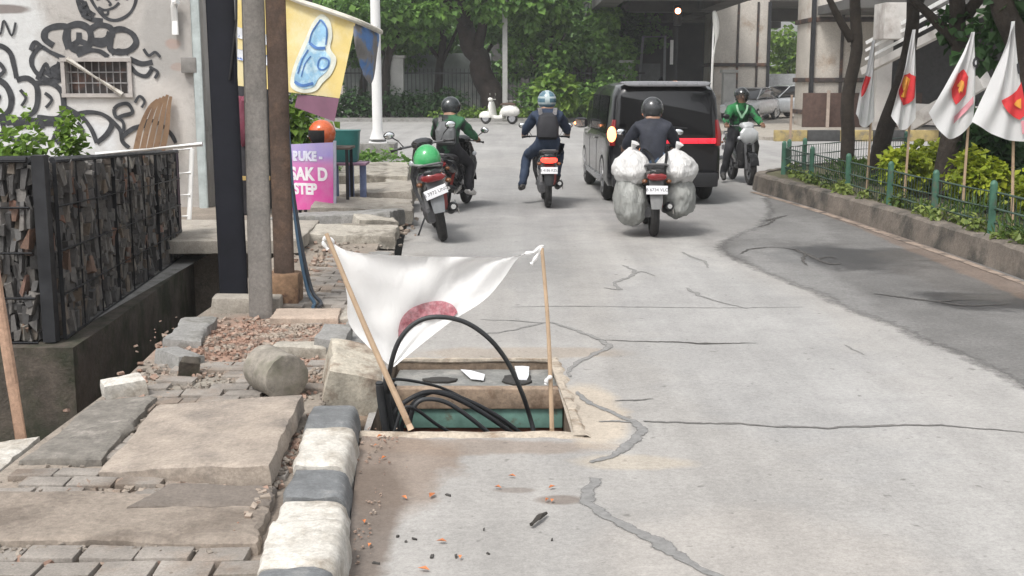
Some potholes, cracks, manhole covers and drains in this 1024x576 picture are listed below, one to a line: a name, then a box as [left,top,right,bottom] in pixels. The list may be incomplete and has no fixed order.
manhole cover [359,357,592,445]
crack [604,265,652,290]
crack [485,319,1020,576]
crack [741,247,842,265]
crack [687,288,743,308]
